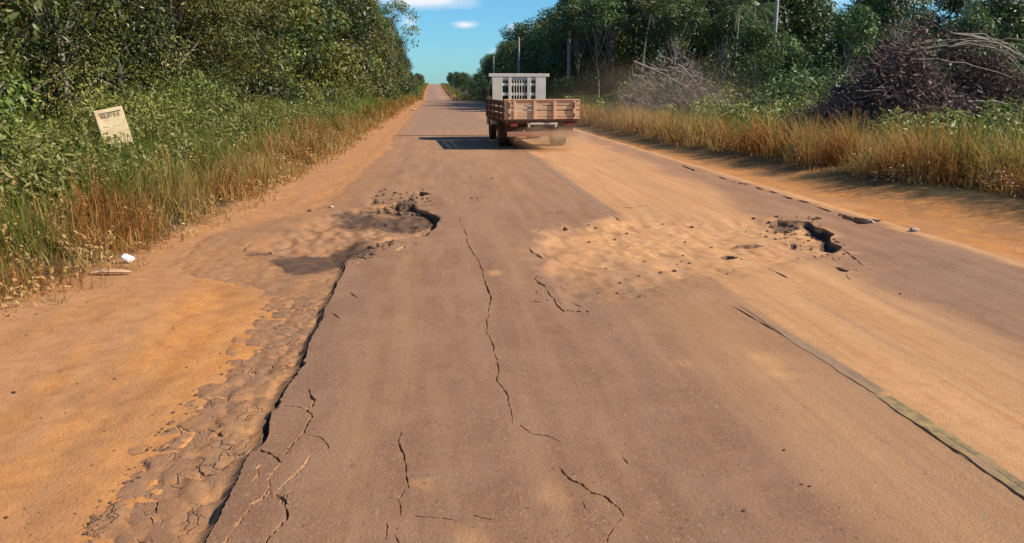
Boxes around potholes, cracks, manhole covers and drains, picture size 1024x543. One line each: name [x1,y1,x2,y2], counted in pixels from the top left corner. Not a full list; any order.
crack [559,467,624,543]
crack [128,502,157,543]
crack [178,258,365,543]
crack [385,431,492,543]
crack [441,197,562,442]
pothole [528,213,842,309]
crack [531,273,589,313]
